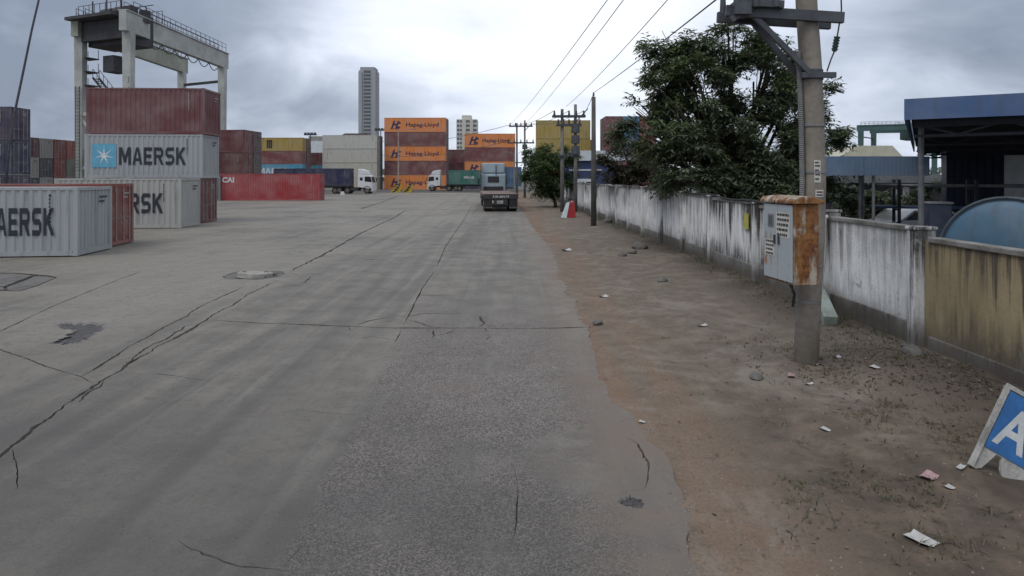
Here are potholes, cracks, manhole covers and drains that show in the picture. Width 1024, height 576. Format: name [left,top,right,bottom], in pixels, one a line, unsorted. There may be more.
manhole cover [0,273,57,291]
crack [619,435,650,494]
manhole cover [222,271,286,280]
pothole [617,495,646,508]
crack [179,541,301,571]
pothole [49,321,109,345]
crack [0,210,582,488]
